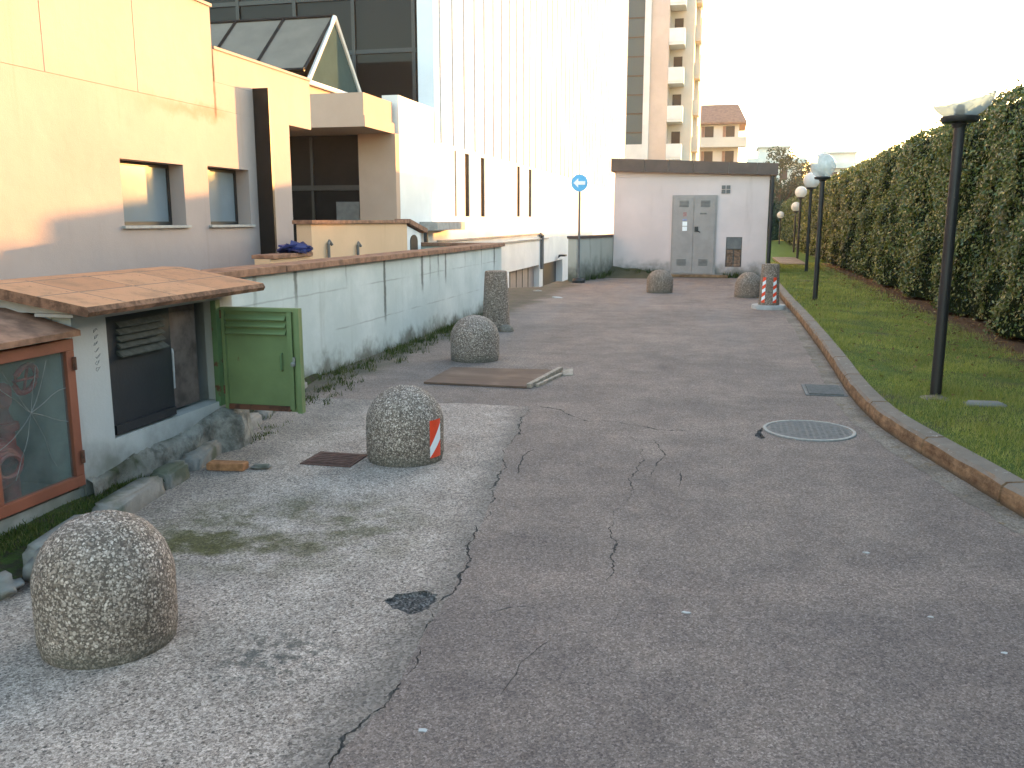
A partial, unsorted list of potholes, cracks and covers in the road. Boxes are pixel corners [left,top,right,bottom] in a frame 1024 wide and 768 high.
manhole cover [763,420,857,442]
manhole cover [300,451,368,468]
pothole [384,590,438,615]
drain grate [801,384,848,397]
crack [540,406,682,582]
crack [328,409,535,768]
